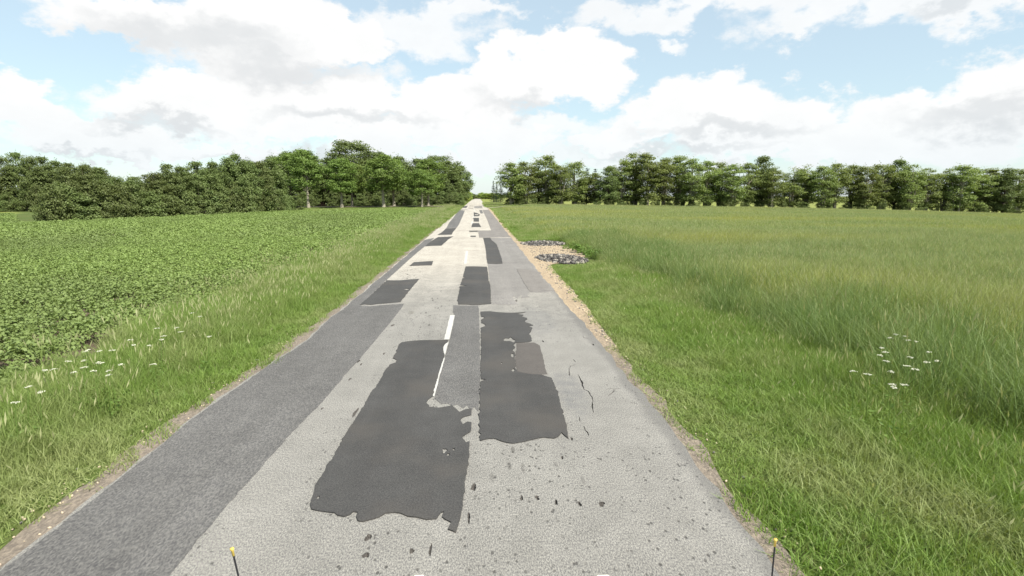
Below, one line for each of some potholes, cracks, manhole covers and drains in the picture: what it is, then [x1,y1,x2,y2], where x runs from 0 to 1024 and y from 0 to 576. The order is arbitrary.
crack [569,359,619,436]
